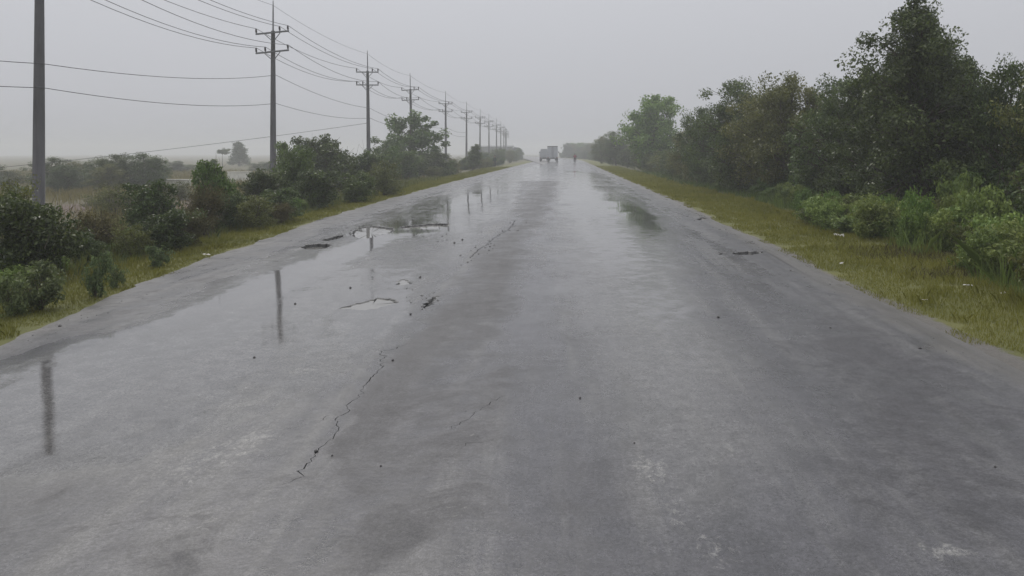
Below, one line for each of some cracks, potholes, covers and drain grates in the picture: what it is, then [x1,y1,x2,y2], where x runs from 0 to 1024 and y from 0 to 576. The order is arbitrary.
pothole [339,297,399,310]
pothole [351,226,395,239]
crack [282,344,406,485]
